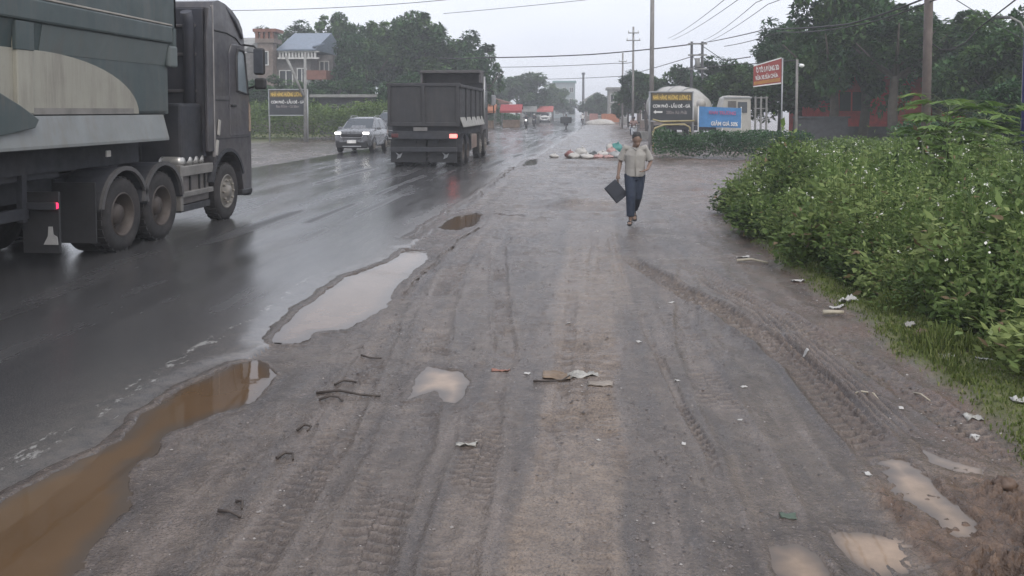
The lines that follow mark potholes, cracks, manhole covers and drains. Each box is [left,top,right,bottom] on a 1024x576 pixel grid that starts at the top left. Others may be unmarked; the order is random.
pothole [808,521,960,576]
pothole [0,358,288,576]
pothole [397,364,484,409]
pothole [262,248,434,347]
pothole [429,212,490,232]
pothole [749,533,849,576]
pothole [859,450,1007,551]
